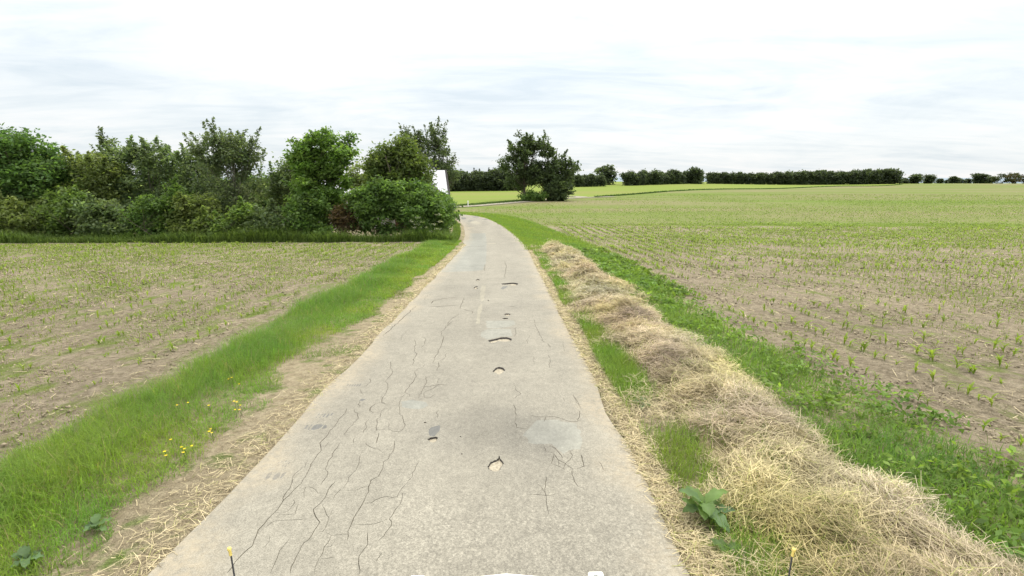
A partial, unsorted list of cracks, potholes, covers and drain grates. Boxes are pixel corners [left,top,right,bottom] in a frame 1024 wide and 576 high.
crack [227,295,473,573]
crack [531,447,584,514]
pothole [487,455,504,471]
